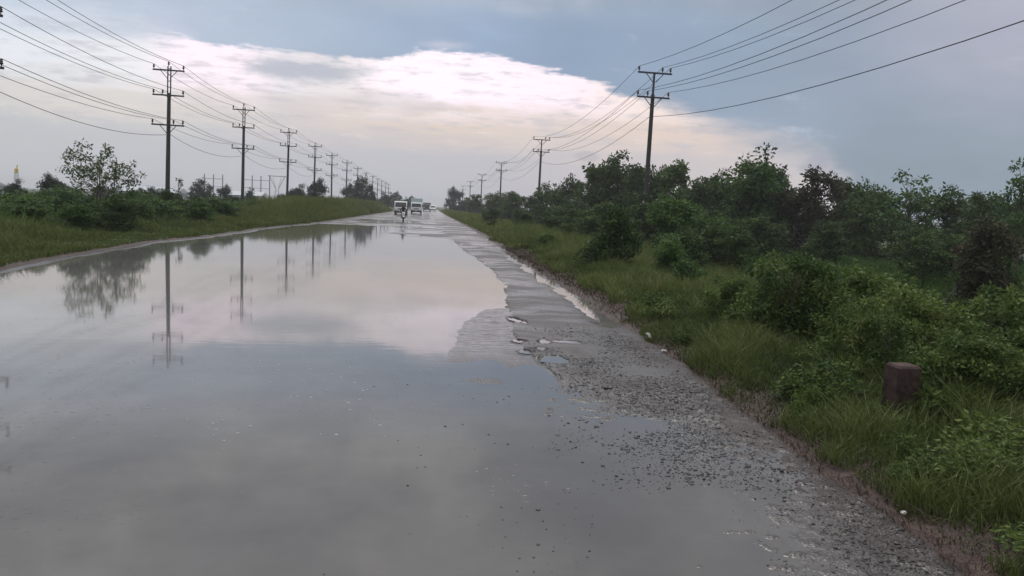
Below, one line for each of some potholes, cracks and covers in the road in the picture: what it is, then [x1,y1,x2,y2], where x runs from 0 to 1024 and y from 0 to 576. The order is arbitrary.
pothole [537,353,573,365]
